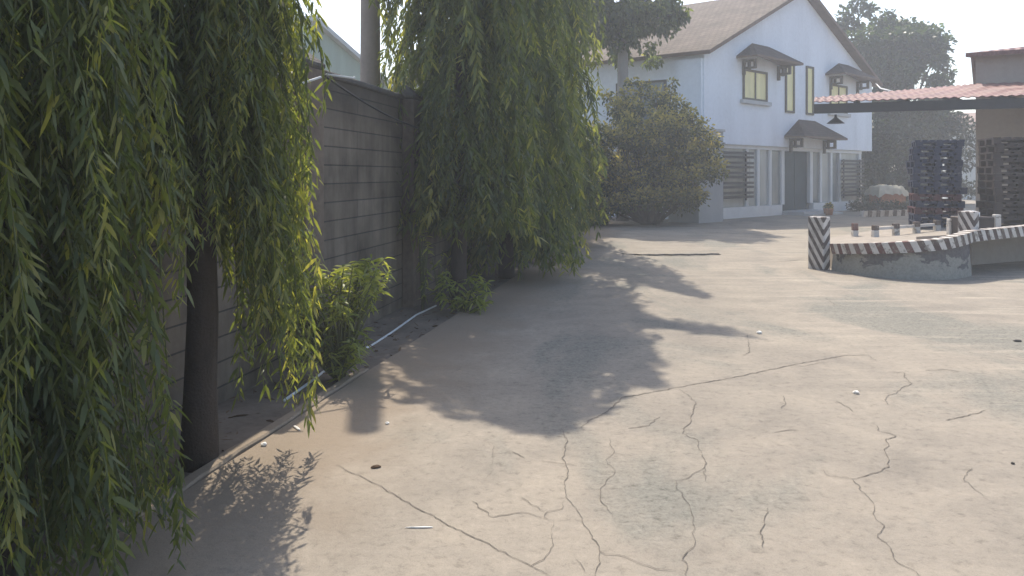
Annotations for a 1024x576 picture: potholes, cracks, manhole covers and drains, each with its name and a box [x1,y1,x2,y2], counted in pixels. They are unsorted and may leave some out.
crack [338,335,871,576]
crack [822,423,919,575]
